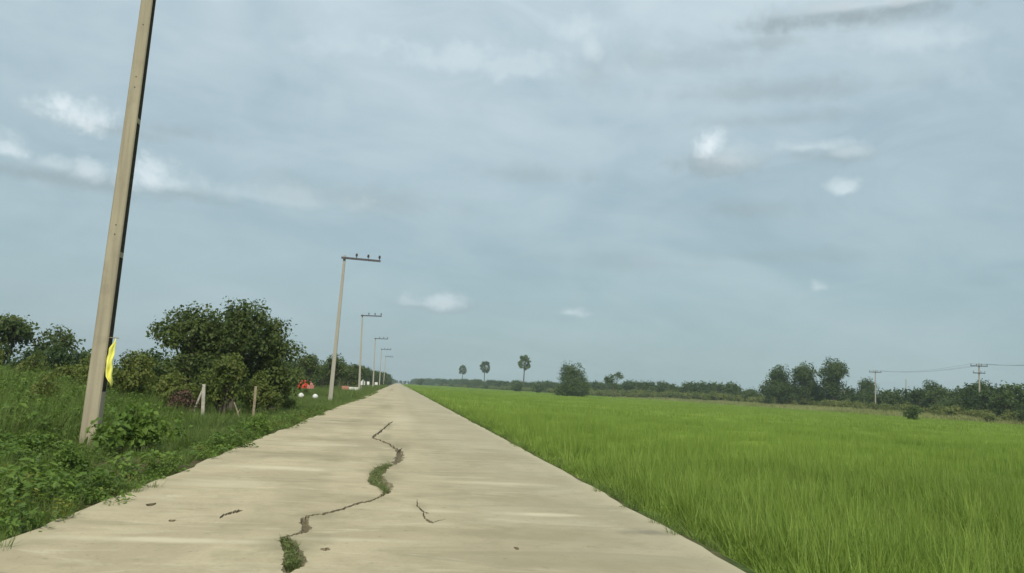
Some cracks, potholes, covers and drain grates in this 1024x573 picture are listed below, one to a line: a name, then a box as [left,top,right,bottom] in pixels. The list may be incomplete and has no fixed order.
crack [416,502,445,524]
crack [278,421,405,573]
crack [220,509,243,518]
